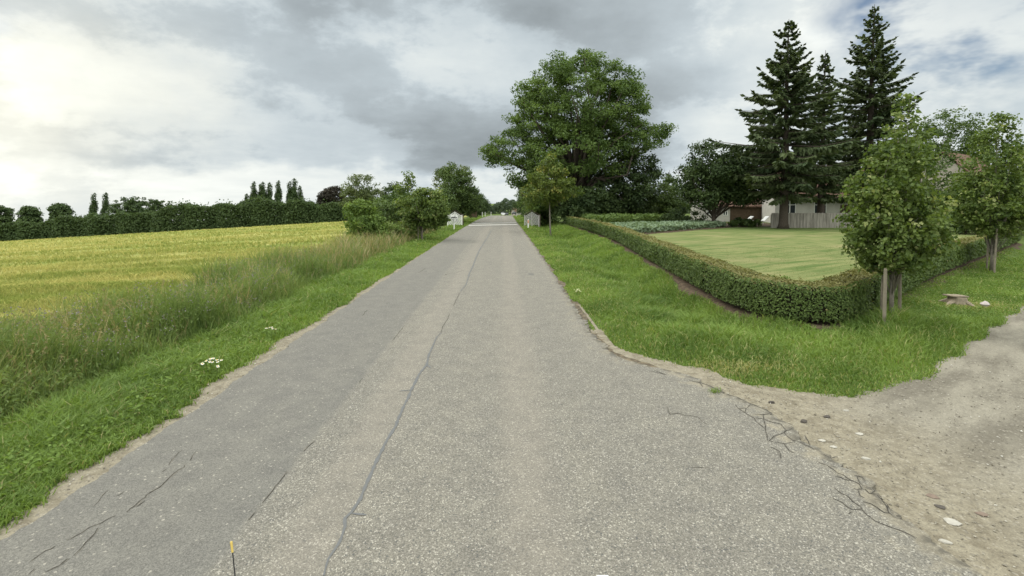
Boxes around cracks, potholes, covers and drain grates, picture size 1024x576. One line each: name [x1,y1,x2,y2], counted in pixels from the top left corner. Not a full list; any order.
crack [690,380,917,539]
crack [29,450,194,574]
